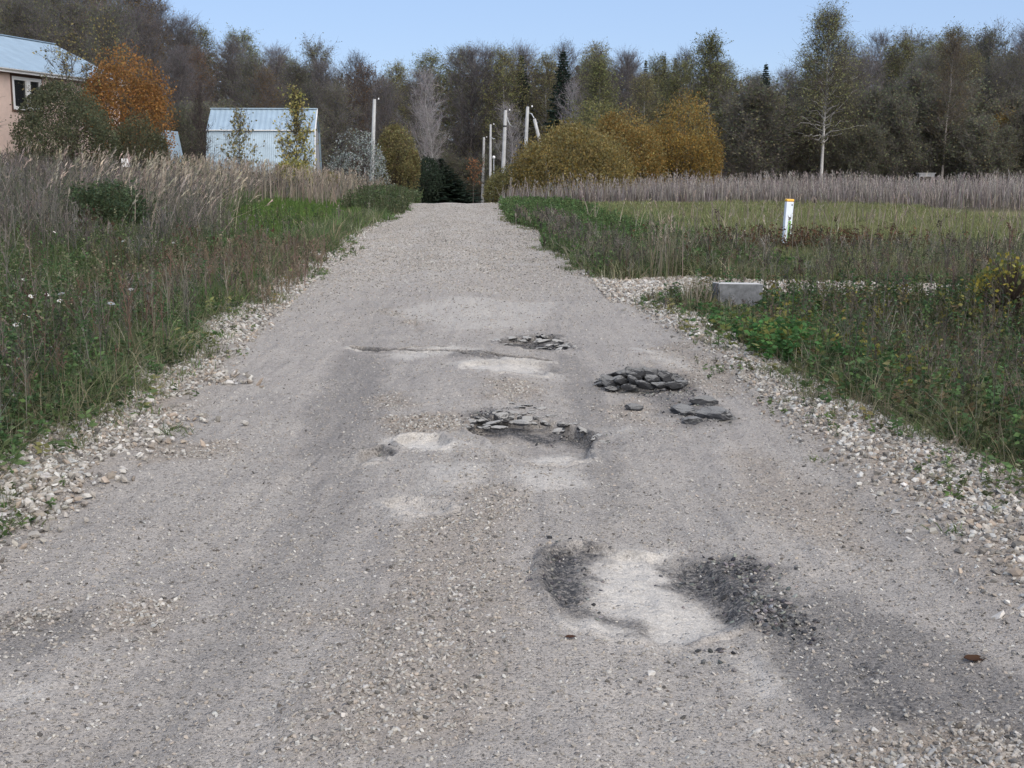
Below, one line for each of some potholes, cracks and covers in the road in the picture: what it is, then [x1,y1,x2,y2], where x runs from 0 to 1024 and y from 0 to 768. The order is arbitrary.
crack [343,345,560,364]
pothole [485,334,578,352]
pothole [444,402,614,468]
